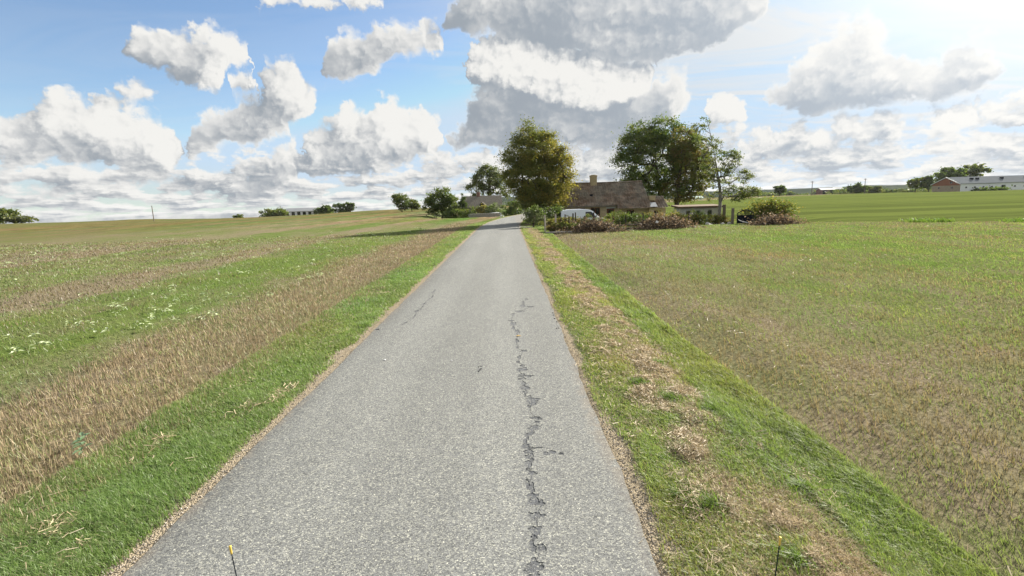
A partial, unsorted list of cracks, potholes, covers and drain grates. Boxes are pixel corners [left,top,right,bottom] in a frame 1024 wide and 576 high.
crack [508,298,564,576]
